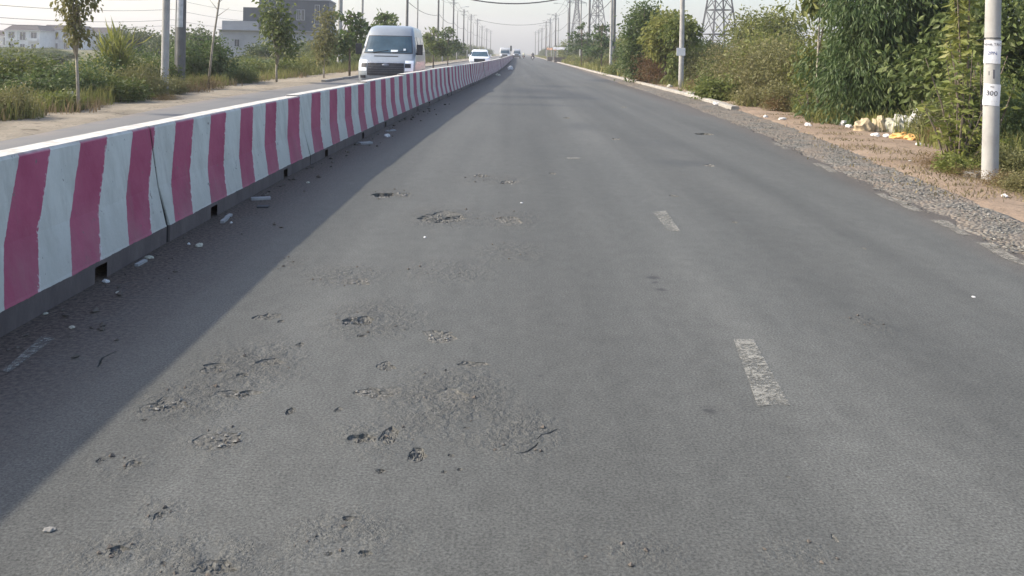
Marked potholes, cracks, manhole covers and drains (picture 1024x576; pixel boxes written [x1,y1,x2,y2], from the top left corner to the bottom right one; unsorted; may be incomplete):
pothole [422,330,458,344]
pothole [407,447,428,463]
pothole [495,217,522,226]
pothole [353,387,402,401]
pothole [378,426,399,445]
crack [516,429,557,454]
pothole [347,433,377,443]
pothole [192,432,241,451]
pothole [342,316,374,325]
pothole [139,397,188,413]
pothole [417,211,465,223]
